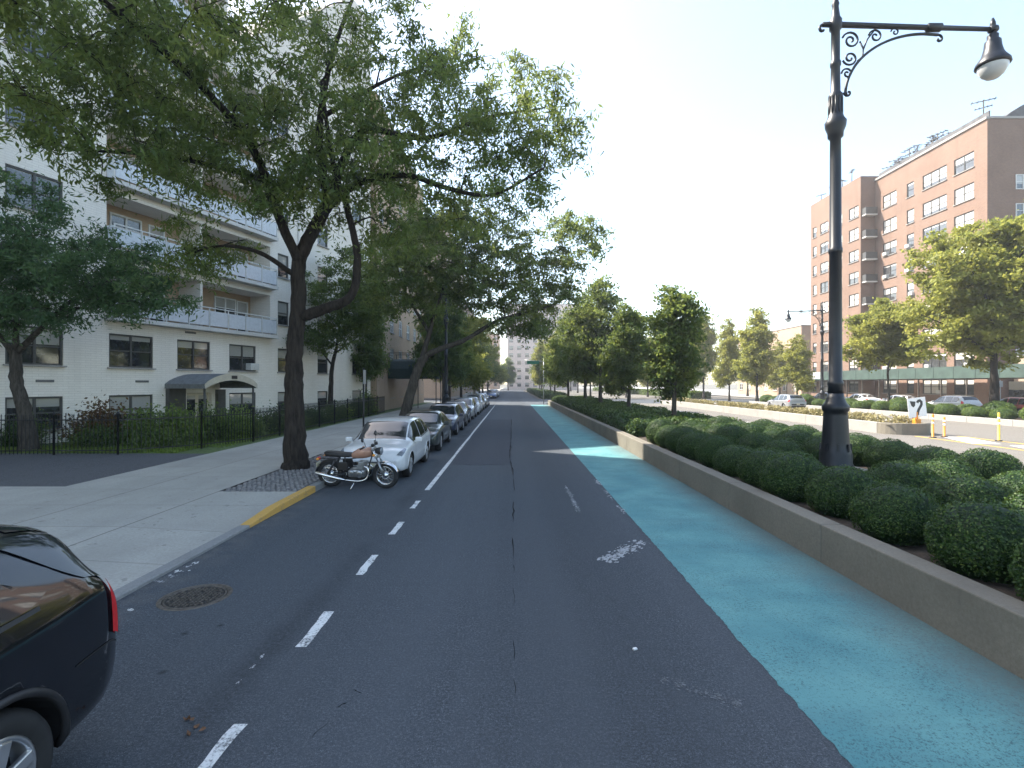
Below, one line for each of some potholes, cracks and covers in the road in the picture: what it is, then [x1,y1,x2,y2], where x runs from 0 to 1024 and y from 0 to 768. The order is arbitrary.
manhole cover [156,584,233,611]
